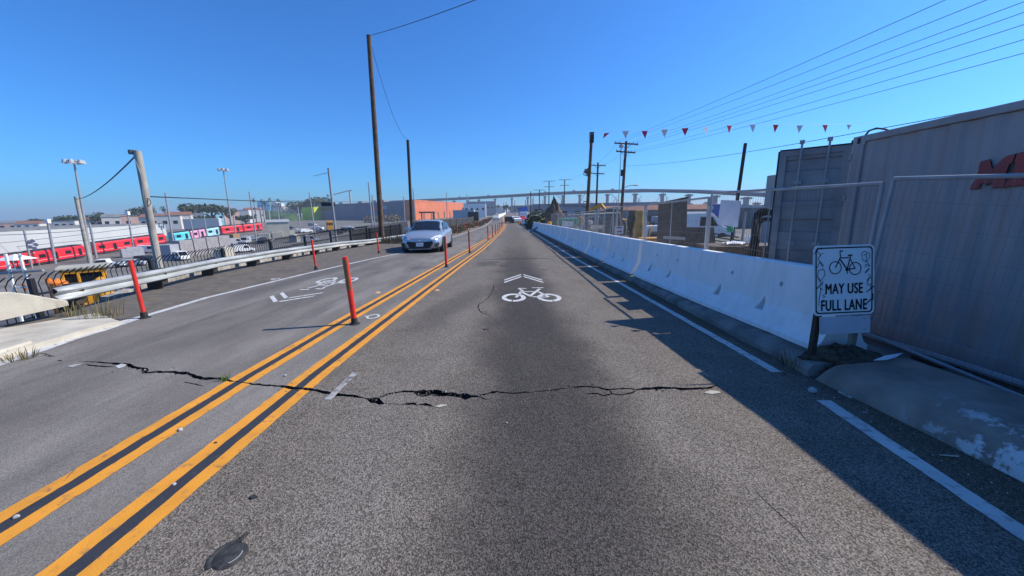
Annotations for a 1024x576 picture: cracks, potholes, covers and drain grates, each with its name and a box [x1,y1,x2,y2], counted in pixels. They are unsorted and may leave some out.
crack [80,361,718,407]
crack [754,488,807,541]
utility cover [204,532,249,571]
